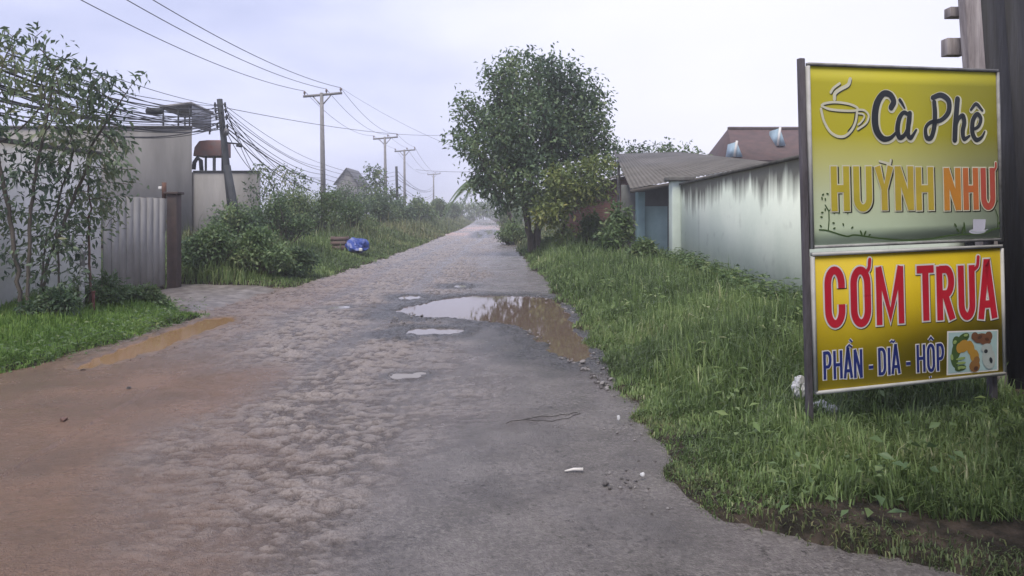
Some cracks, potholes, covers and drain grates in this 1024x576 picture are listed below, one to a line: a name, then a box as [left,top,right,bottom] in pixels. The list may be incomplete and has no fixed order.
pothole [377,293,607,368]
crack [507,412,581,423]
